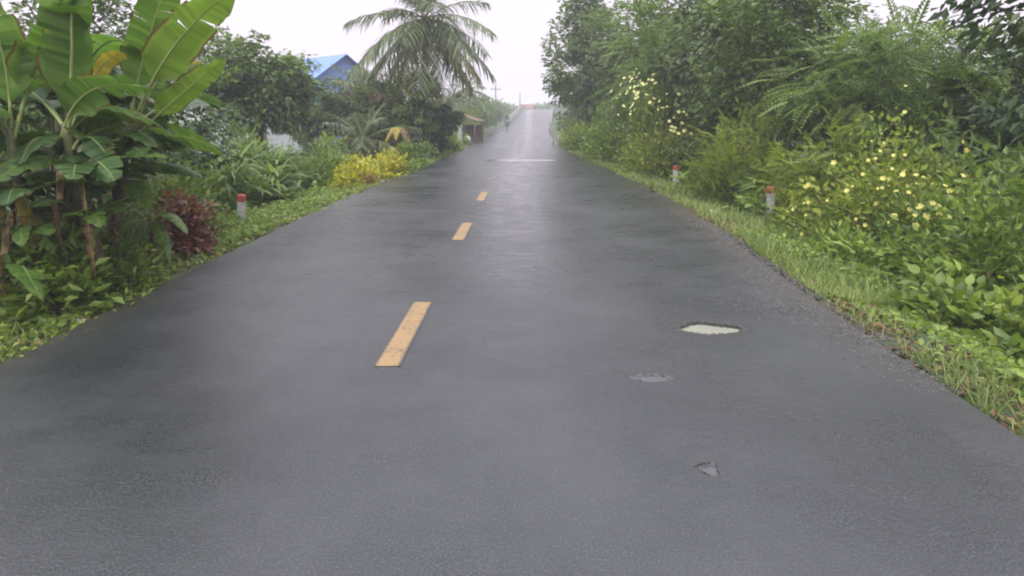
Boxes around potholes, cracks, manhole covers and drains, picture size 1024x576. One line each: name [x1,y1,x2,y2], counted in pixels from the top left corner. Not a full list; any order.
pothole [693,461,721,476]
pothole [670,319,748,336]
pothole [625,372,676,382]
